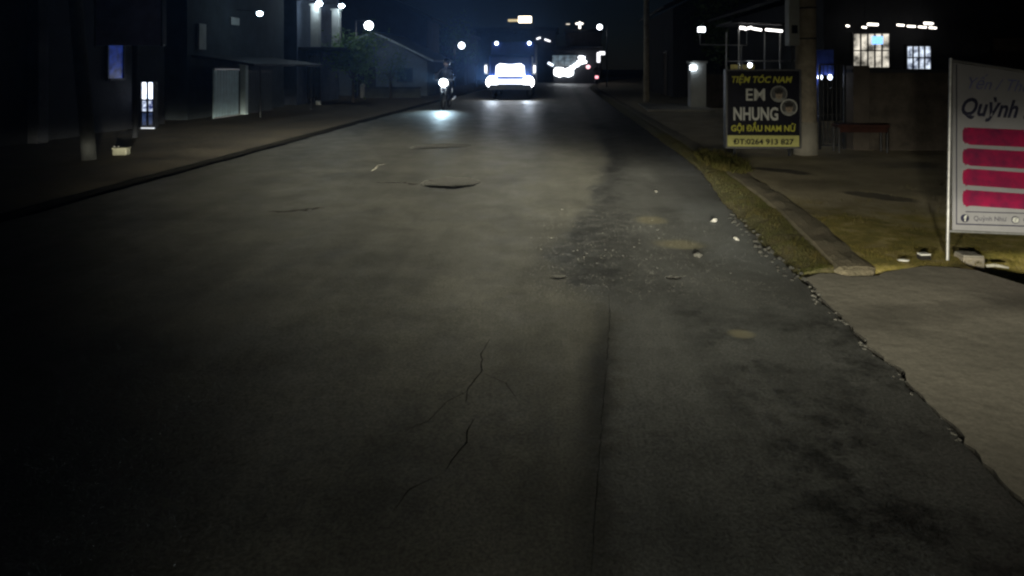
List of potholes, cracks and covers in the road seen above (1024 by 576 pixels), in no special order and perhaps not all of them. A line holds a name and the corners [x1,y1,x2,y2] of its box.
pothole [421,176,481,189]
crack [393,341,517,511]
